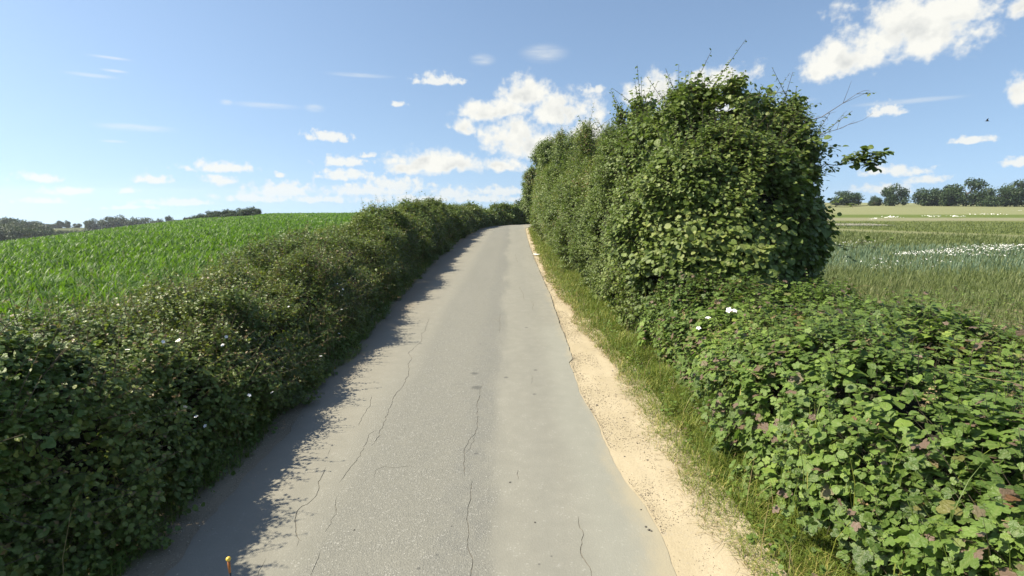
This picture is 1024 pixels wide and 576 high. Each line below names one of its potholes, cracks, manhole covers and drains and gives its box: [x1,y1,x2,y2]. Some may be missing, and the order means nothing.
crack [463,384,483,576]
crack [295,470,337,545]
crack [339,320,429,483]
